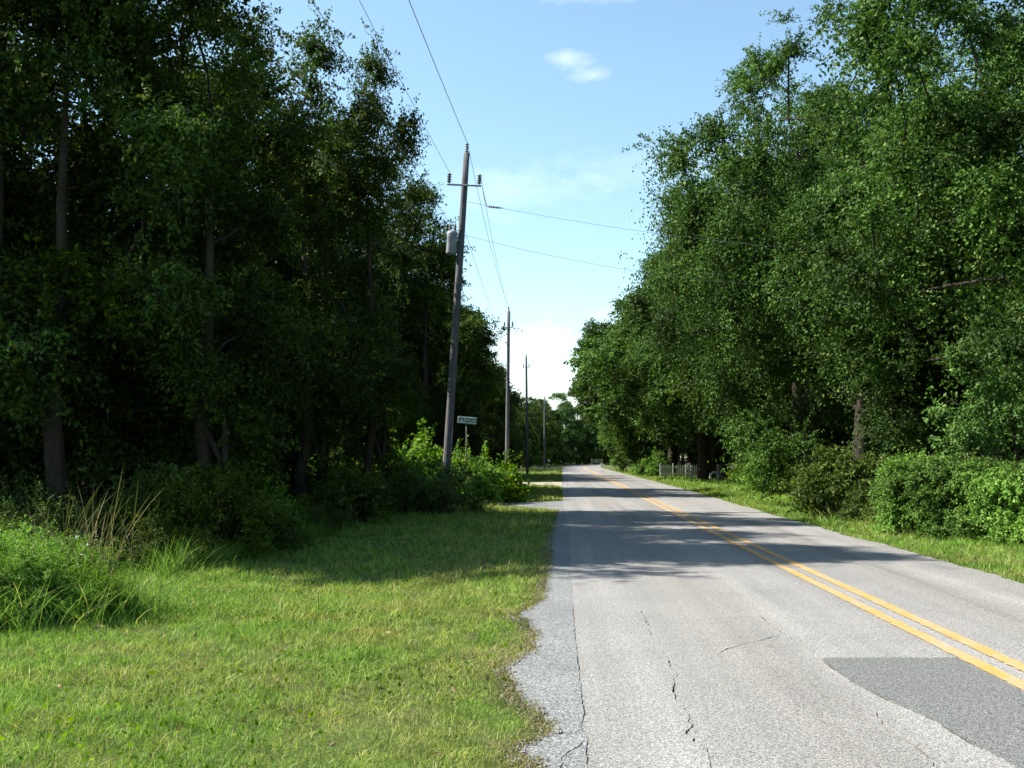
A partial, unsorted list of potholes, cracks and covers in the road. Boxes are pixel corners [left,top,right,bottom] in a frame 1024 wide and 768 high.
crack [668,661,711,766]
